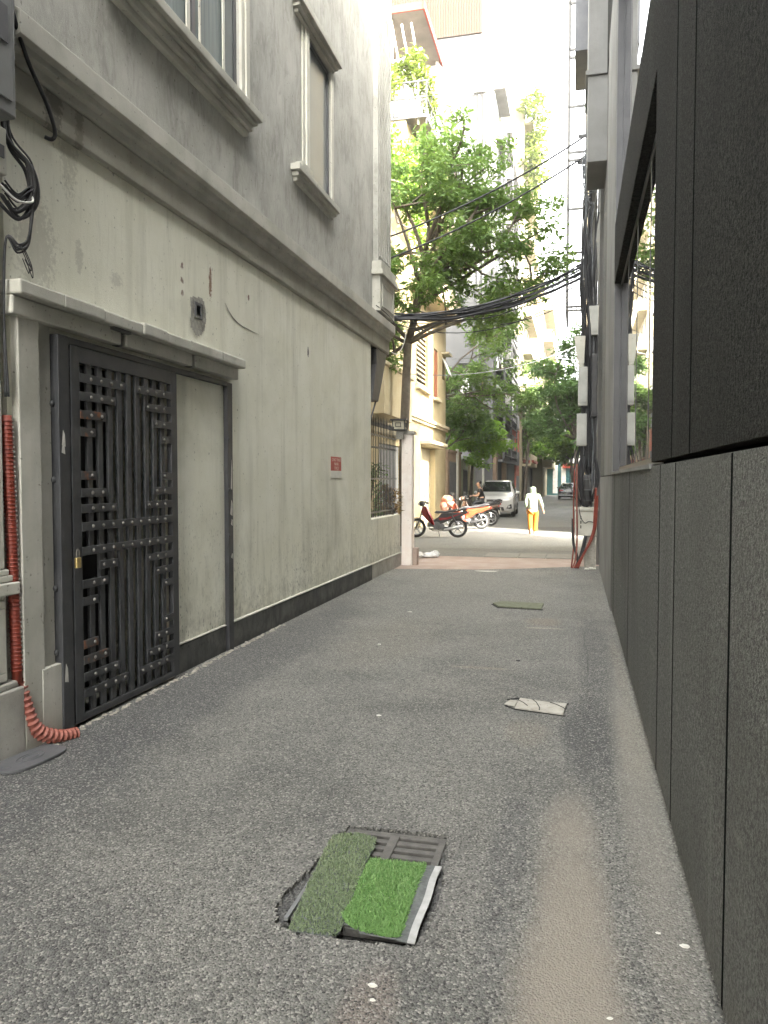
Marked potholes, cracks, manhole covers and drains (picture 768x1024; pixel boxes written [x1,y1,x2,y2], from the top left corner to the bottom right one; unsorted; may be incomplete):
drain grate [290,828,447,946]
